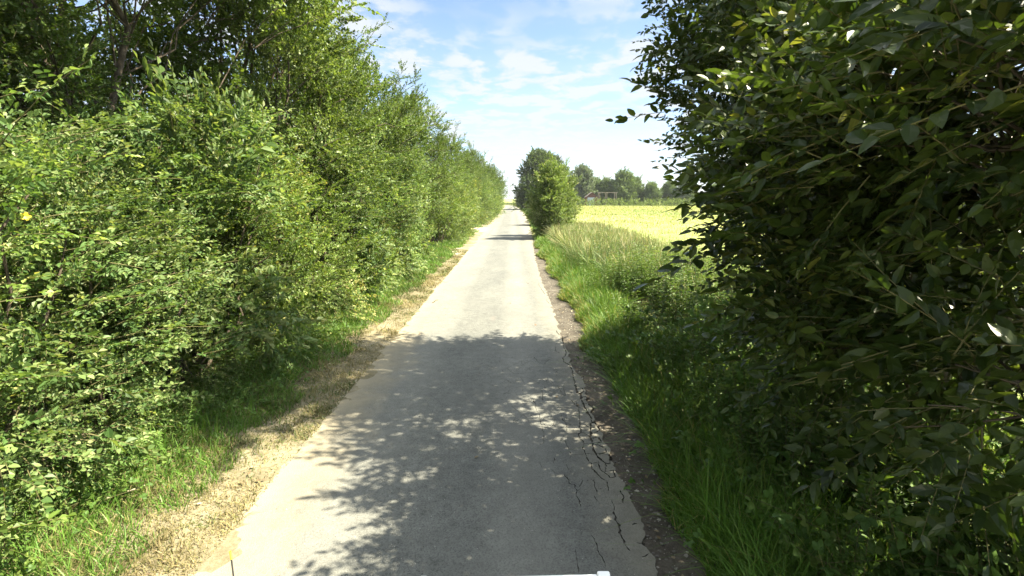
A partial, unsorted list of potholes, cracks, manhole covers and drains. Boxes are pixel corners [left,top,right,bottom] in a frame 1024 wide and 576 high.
crack [488,331,649,557]
